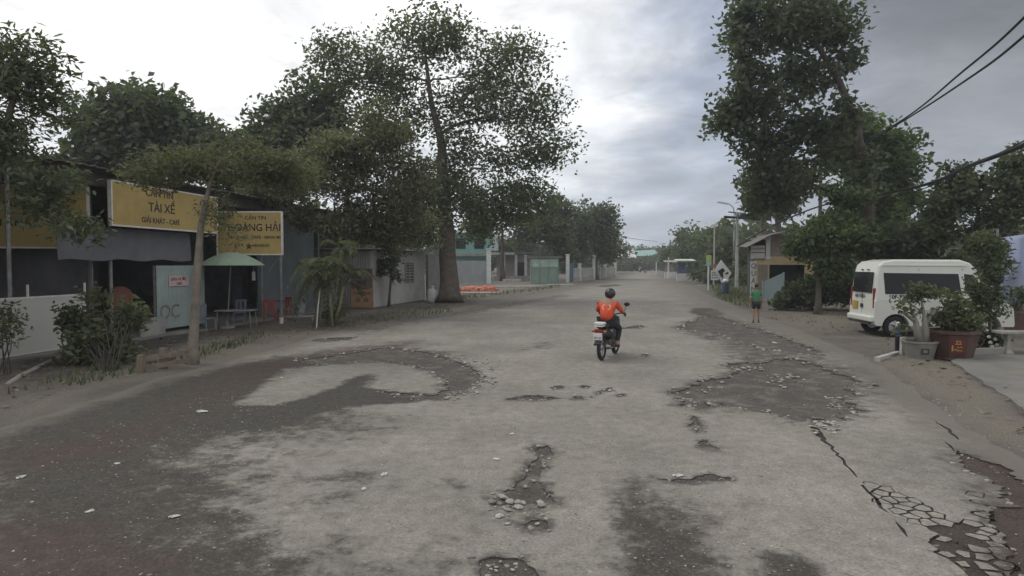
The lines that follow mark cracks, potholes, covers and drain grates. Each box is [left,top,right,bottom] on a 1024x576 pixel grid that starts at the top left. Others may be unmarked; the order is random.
crack [936,422,959,451]
pothole [668,358,865,423]
pothole [698,440,719,452]
pothole [523,520,549,529]
pothole [503,445,555,503]
pothole [677,316,819,355]
crack [810,427,1021,576]
pothole [479,557,539,576]
pothole [661,474,732,484]
